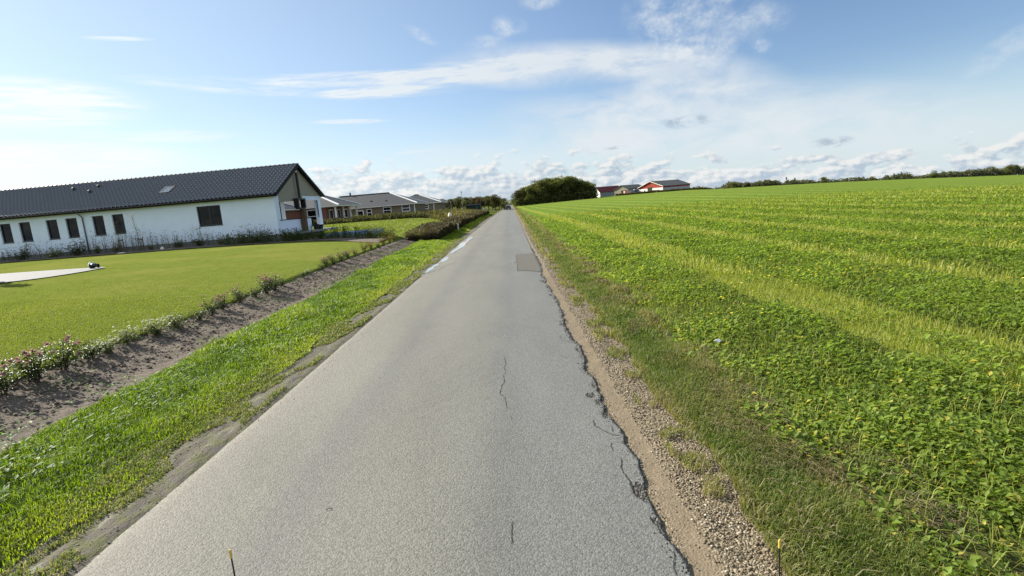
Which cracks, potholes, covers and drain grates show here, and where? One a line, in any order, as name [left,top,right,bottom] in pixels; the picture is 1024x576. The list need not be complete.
crack [593,421,677,575]
